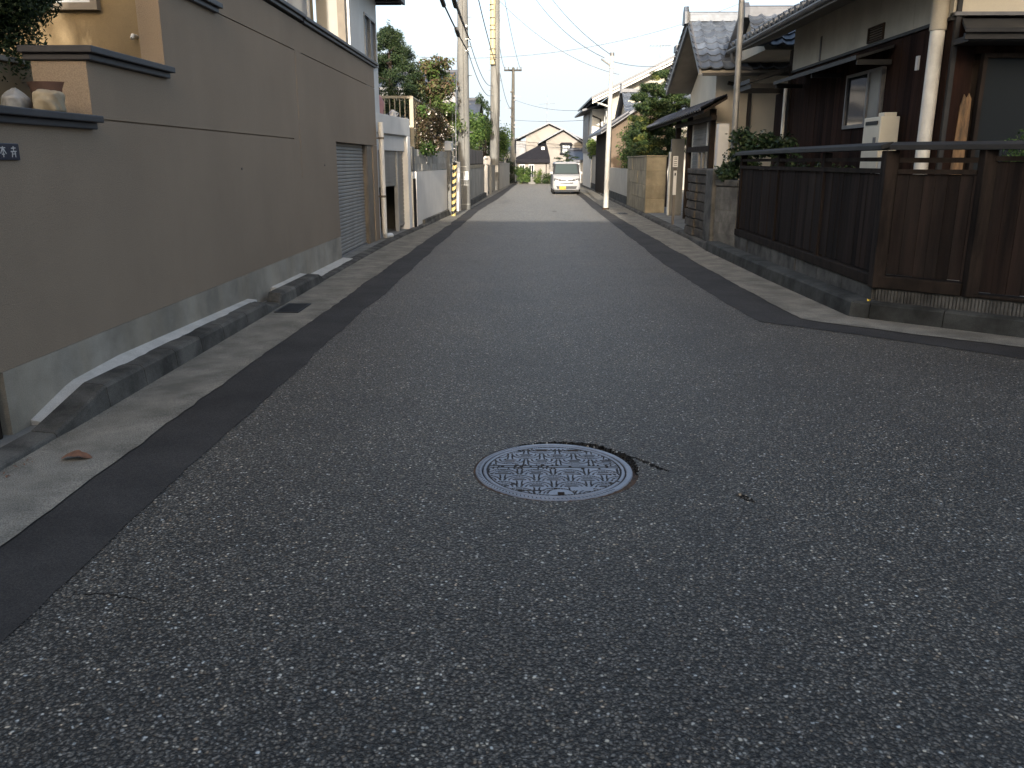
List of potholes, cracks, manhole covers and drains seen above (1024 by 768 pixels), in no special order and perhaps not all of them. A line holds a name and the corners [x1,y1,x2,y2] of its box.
manhole cover [474,444,639,502]
crack [62,593,151,604]
